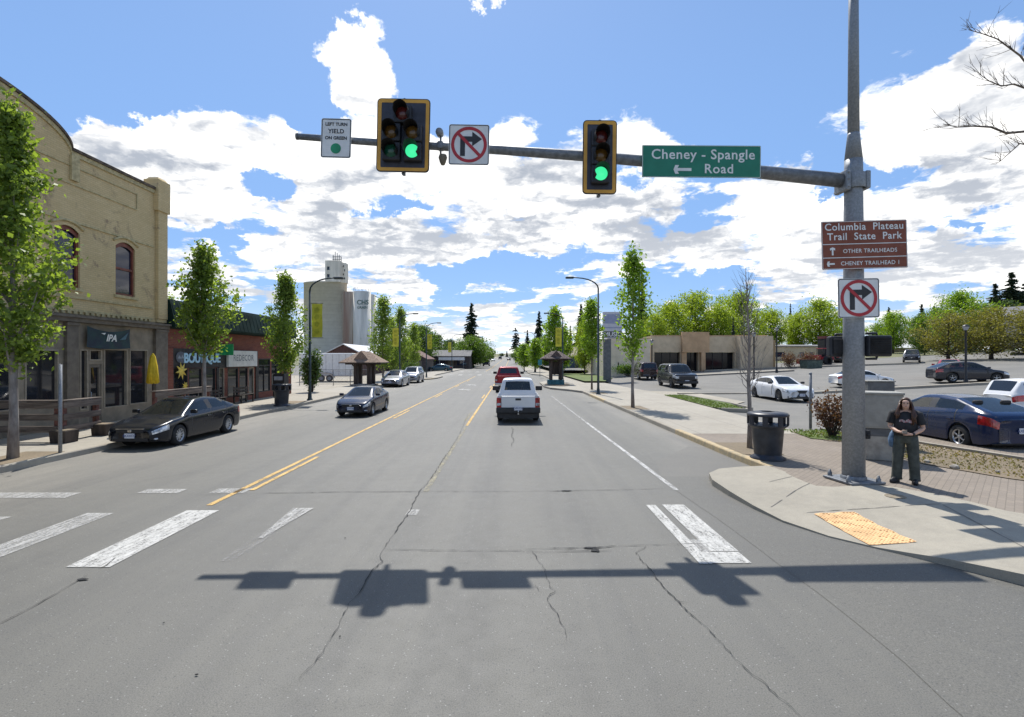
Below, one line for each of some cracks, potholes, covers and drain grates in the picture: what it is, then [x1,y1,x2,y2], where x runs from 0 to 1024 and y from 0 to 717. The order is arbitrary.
crack [523,545,616,633]
crack [638,542,794,709]
crack [299,425,501,678]
